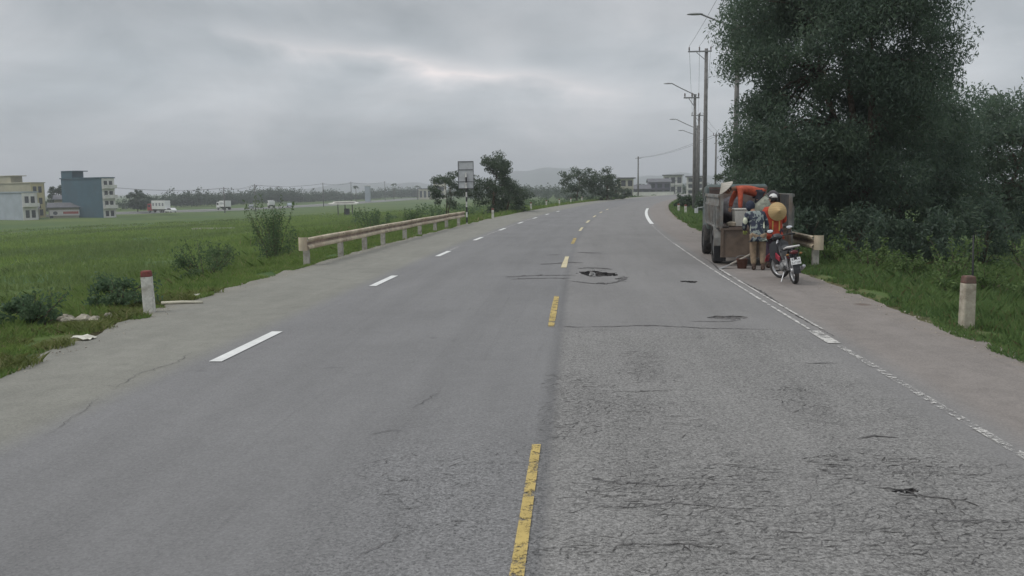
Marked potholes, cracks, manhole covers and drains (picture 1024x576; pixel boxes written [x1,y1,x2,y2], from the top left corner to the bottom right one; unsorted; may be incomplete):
pothole [575,269,618,277]
crack [532,351,1024,576]
